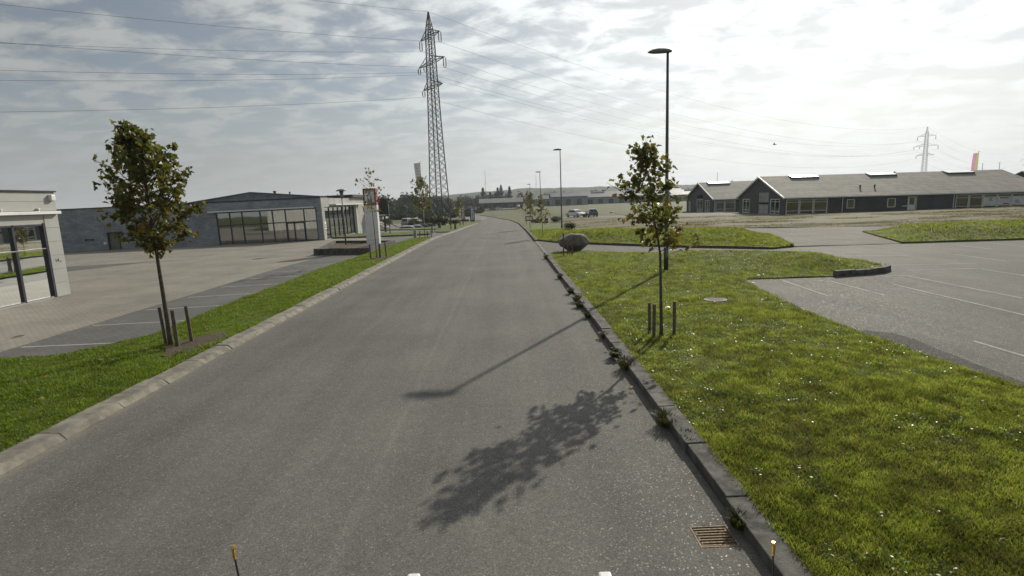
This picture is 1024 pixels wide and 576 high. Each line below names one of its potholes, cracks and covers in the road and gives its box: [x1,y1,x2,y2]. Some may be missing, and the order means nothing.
drain grate [689,524,741,548]
